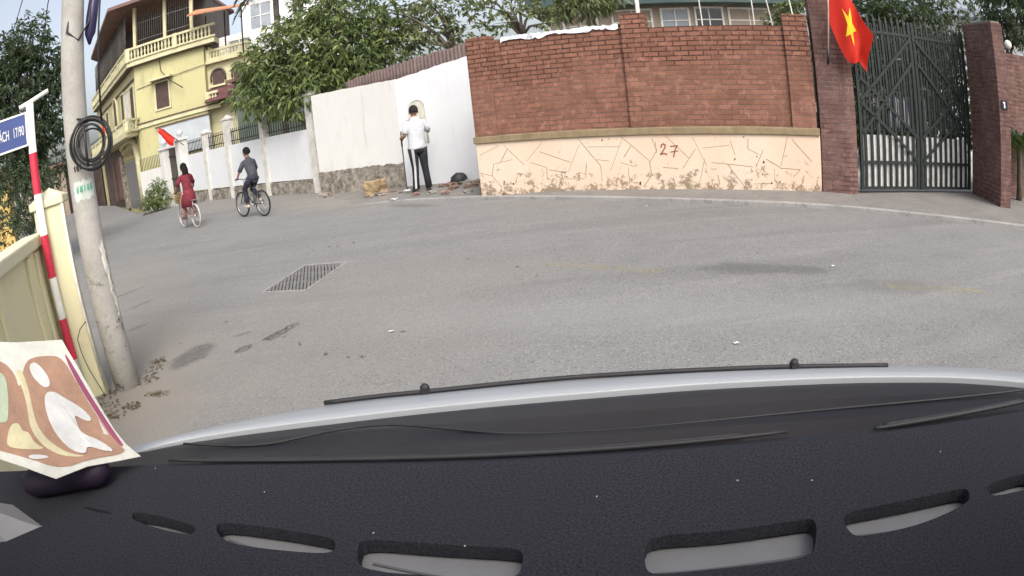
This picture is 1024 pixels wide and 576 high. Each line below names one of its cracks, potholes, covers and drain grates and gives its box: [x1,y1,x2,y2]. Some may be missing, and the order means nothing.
drain grate [261,261,348,293]
pothole [261,322,300,341]
